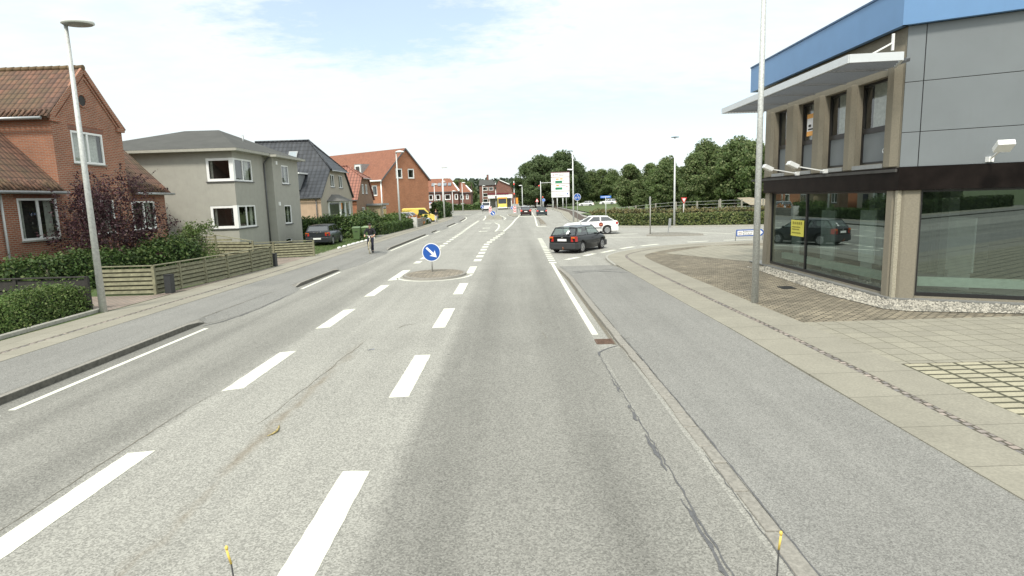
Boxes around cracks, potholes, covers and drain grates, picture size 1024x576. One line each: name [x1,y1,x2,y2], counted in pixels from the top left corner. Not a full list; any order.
crack [598,337,735,576]
crack [257,344,361,424]
